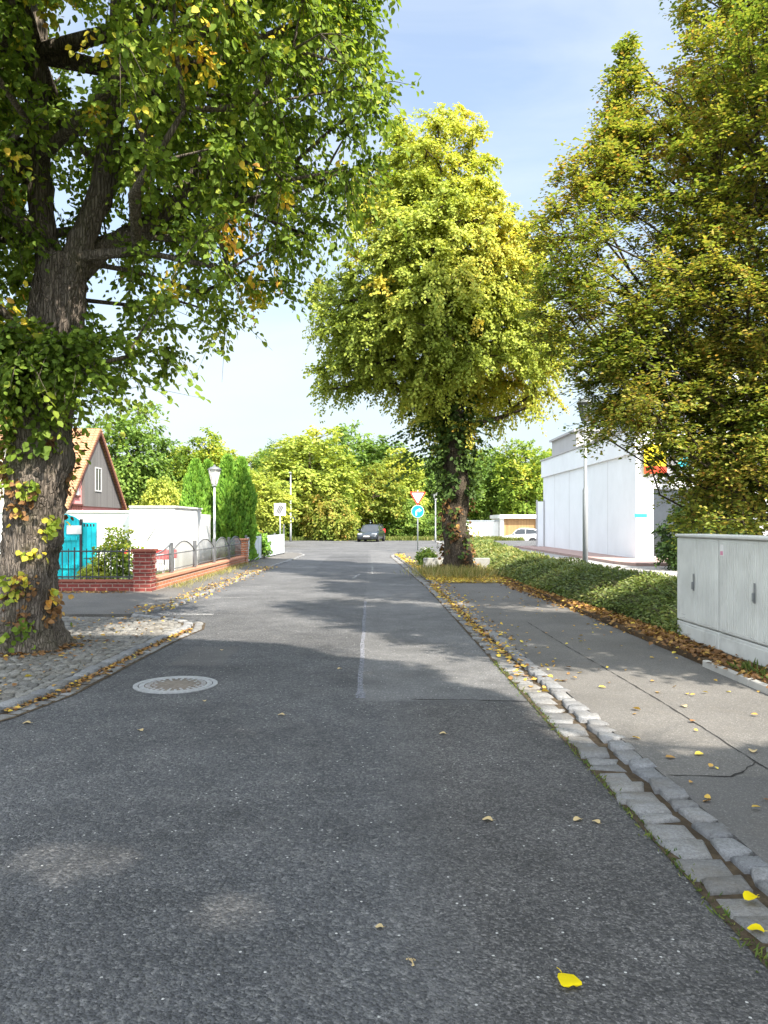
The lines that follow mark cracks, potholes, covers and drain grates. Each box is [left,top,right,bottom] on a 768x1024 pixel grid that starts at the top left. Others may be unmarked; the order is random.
manhole cover [133,676,218,694]
crack [696,762,755,777]
